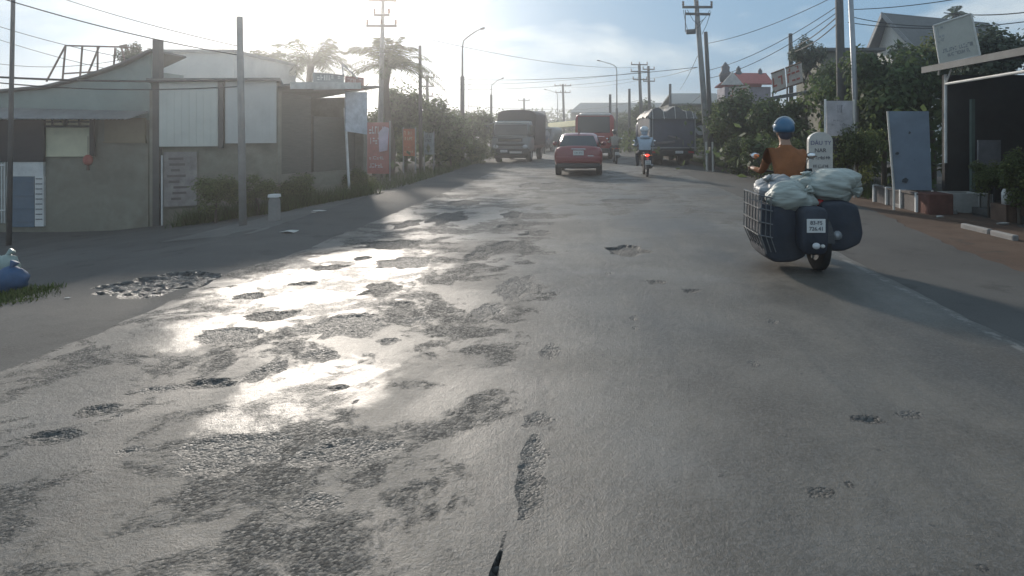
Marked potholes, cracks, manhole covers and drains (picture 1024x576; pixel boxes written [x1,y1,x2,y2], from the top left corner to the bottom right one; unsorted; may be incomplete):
pothole [182,377,238,390]
pothole [71,403,123,419]
pothole [91,270,224,299]
pothole [22,428,88,446]
pothole [893,410,925,420]
pothole [848,415,887,424]
pothole [604,244,653,257]
pothole [424,211,469,226]
crack [489,411,556,576]
pothole [241,310,302,322]
pothole [805,487,835,499]
